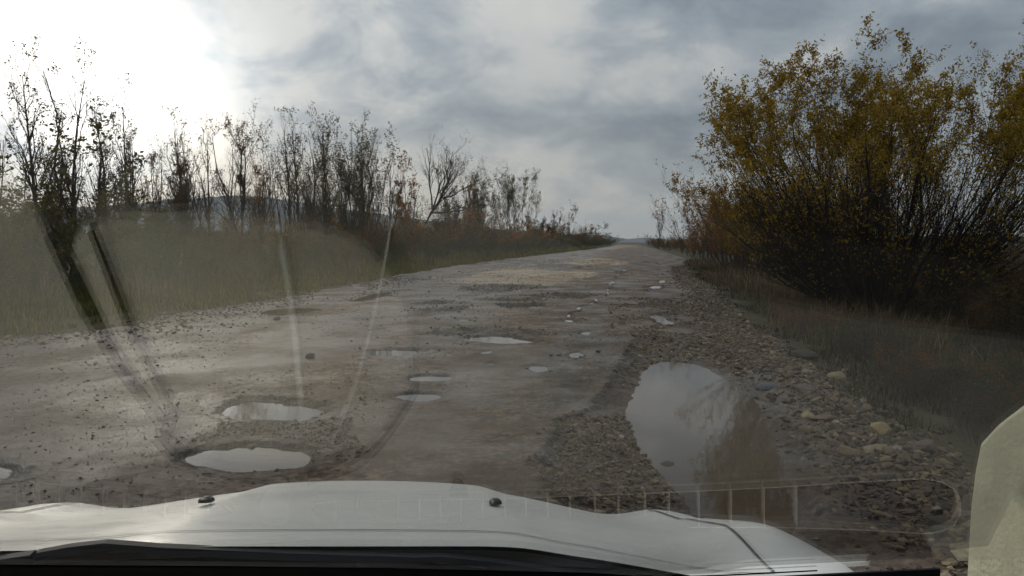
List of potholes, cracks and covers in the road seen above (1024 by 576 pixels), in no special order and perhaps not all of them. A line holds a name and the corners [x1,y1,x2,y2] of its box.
pothole [347,345,439,361]
pothole [148,432,345,480]
pothole [631,313,691,326]
pothole [447,333,552,346]
pothole [388,371,471,385]
pothole [376,388,466,406]
pothole [181,393,360,427]
